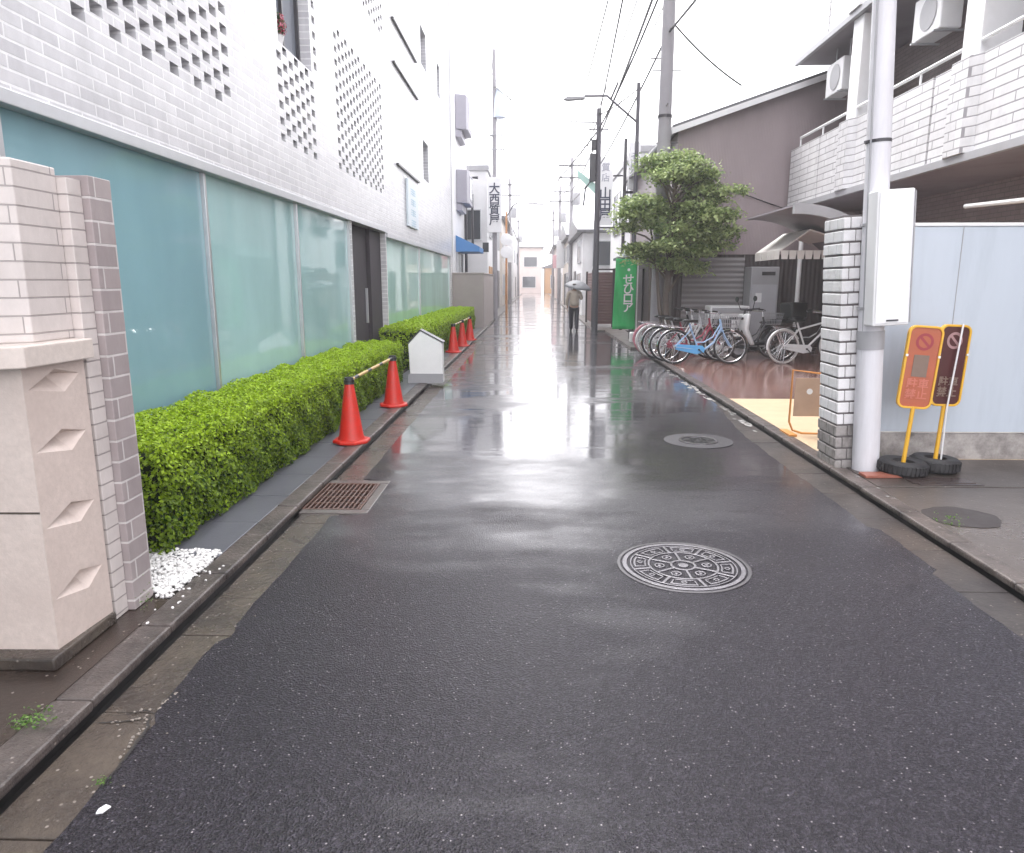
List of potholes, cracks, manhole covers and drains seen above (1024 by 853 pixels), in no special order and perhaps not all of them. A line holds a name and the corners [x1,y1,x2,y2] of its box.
manhole cover [664,434,733,449]
manhole cover [617,542,752,594]
drain grate [298,480,390,517]
